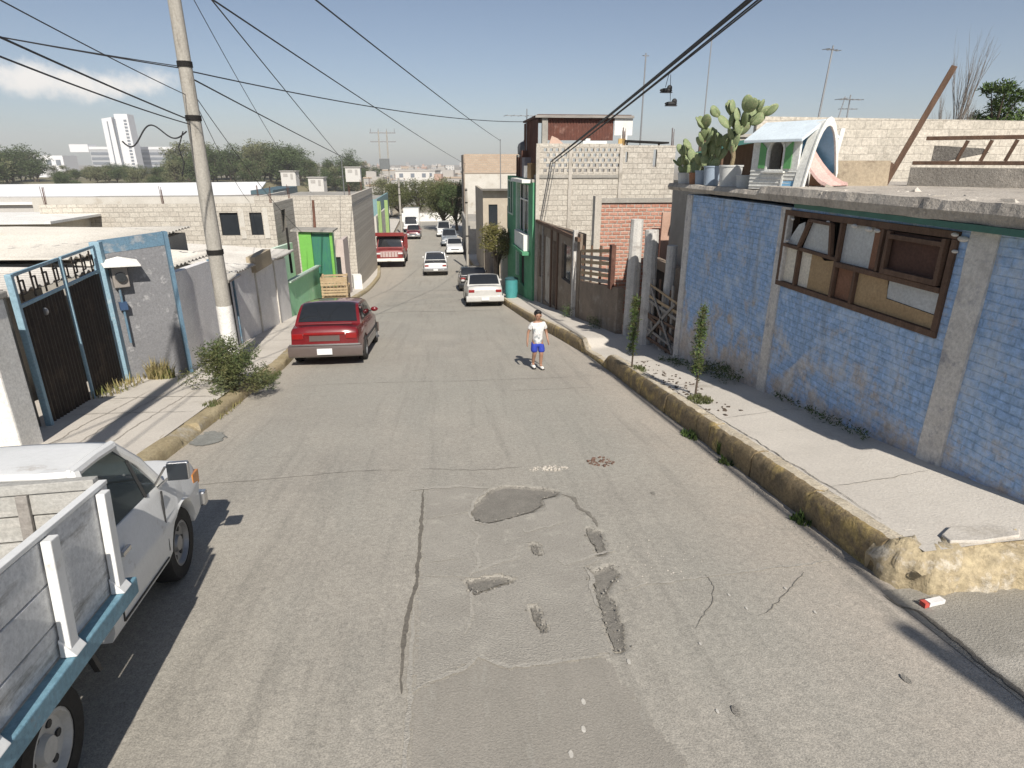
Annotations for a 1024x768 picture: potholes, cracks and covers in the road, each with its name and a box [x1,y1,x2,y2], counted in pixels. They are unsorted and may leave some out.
pothole [466,576,513,595]
pothole [587,565,626,652]
crack [555,550,833,629]
pothole [531,605,547,633]
pothole [586,527,606,556]
pothole [471,486,559,523]
